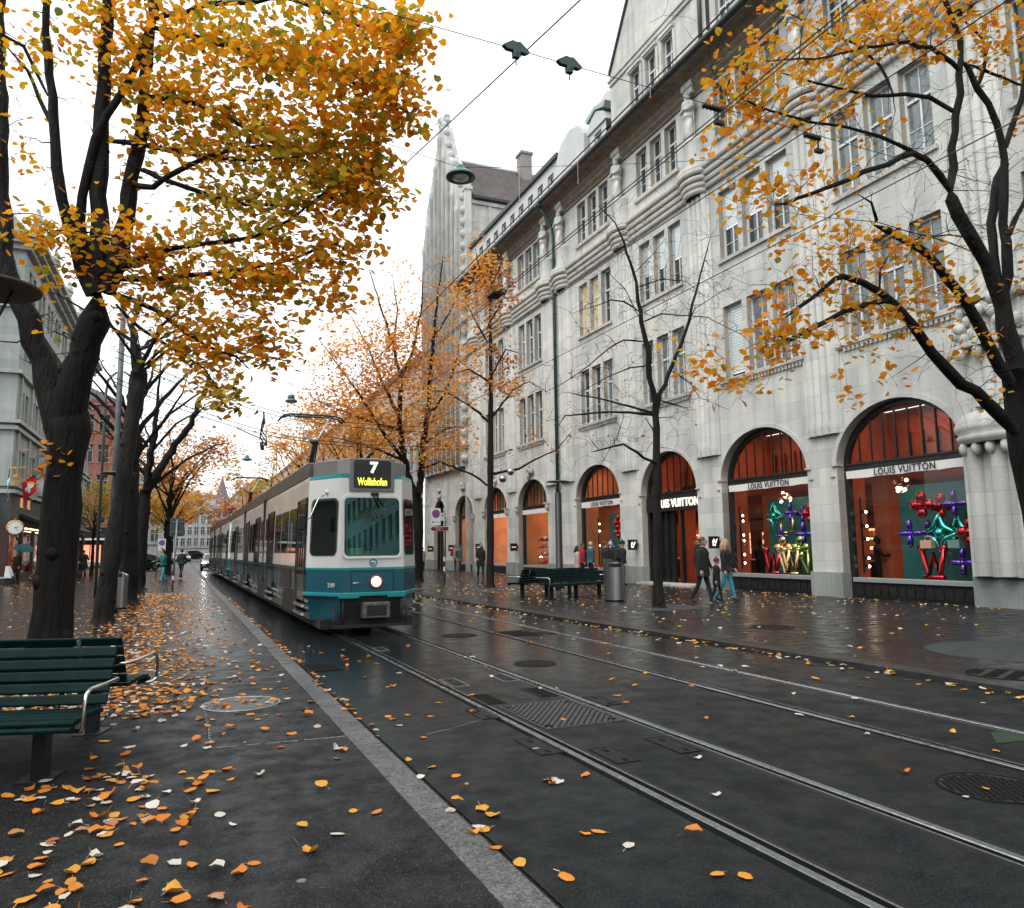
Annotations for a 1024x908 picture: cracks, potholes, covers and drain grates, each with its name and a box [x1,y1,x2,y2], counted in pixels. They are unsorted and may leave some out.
manhole cover [201,696,281,712]
utility cover [644,736,702,754]
utility cover [439,678,470,687]
utility cover [522,687,559,697]
utility cover [489,674,520,682]
utility cover [582,695,622,707]
utility cover [514,737,564,756]
utility cover [588,746,641,764]
manhole cover [935,772,1024,804]
